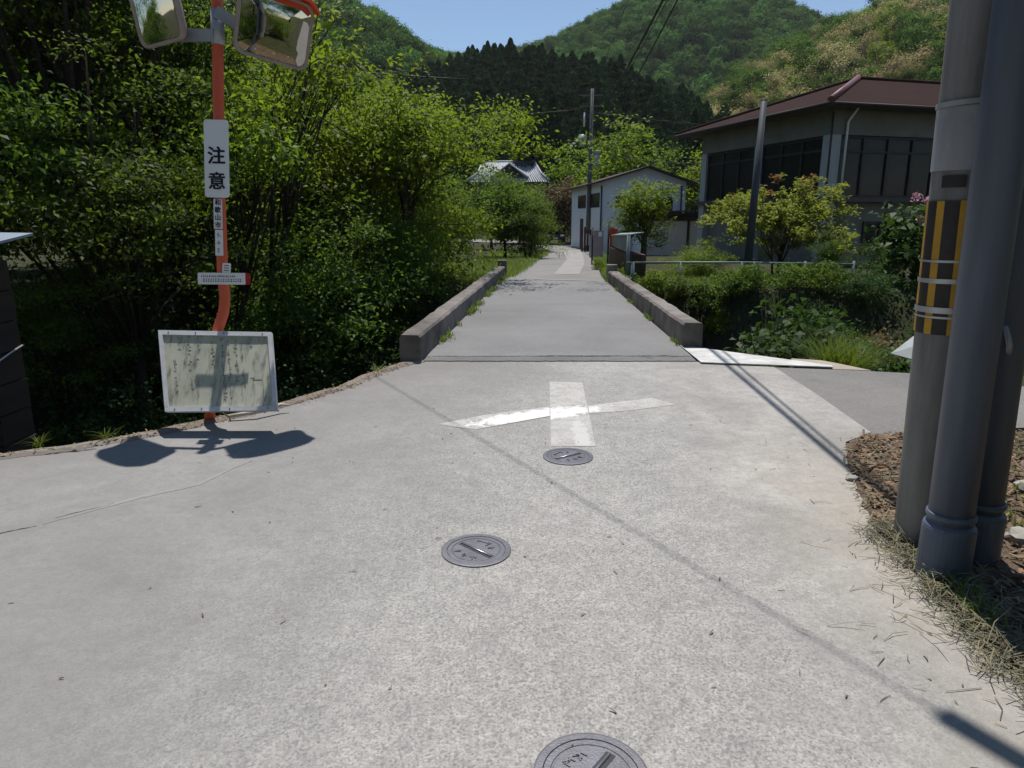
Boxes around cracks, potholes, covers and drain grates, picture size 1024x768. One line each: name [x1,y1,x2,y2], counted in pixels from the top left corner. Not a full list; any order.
manhole cover [543,448,593,465]
manhole cover [441,534,511,568]
manhole cover [533,733,647,768]
